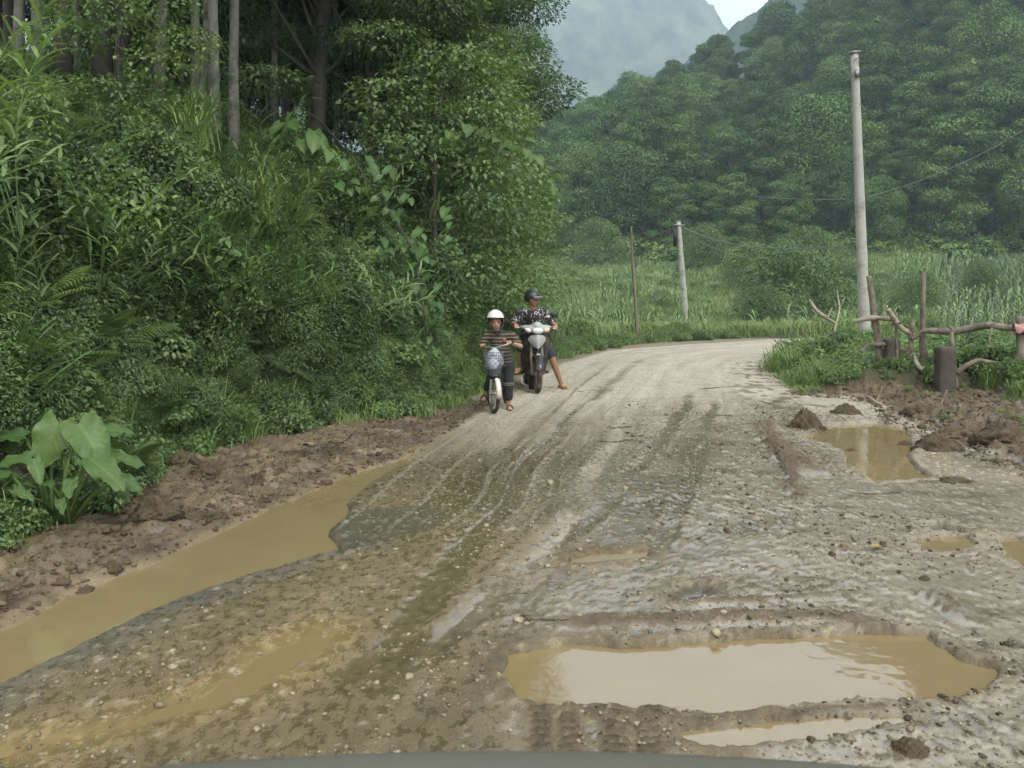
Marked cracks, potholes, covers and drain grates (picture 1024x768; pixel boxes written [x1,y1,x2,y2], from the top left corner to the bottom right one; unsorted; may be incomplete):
pothole [799,420,936,482]
pothole [495,621,1012,715]
pothole [559,545,657,563]
pothole [672,697,933,750]
pothole [990,530,1024,564]
pothole [905,530,983,552]
